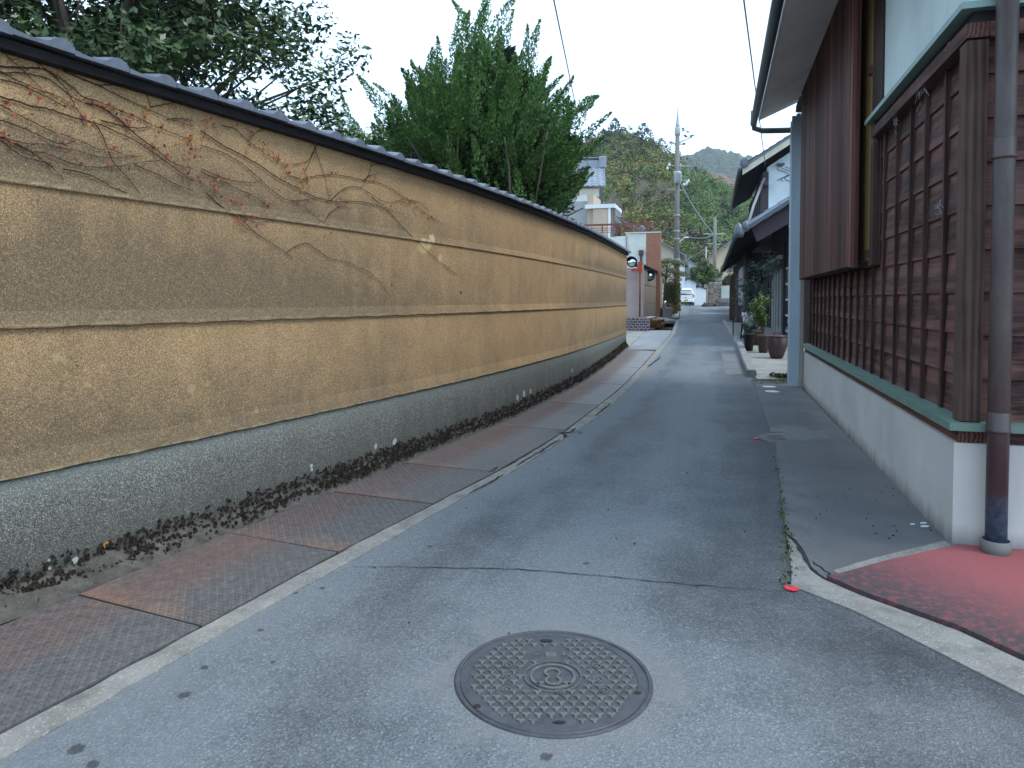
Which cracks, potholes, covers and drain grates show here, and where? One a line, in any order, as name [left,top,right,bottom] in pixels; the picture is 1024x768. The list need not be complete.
manhole cover [454,630,653,739]
crack [355,566,776,591]
